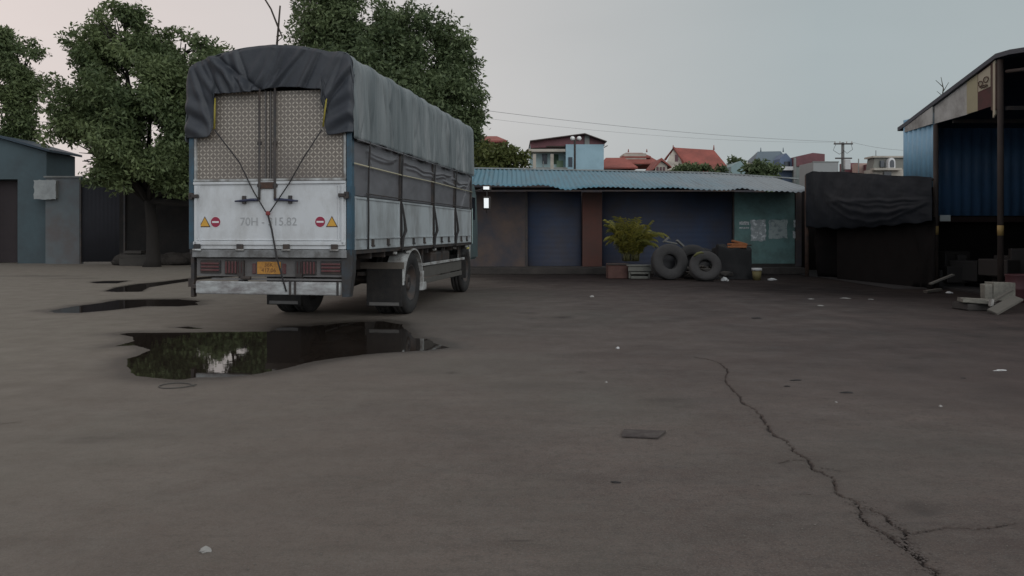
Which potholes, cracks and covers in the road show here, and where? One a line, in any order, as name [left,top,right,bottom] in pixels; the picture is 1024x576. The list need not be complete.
crack [721,365,1008,576]
